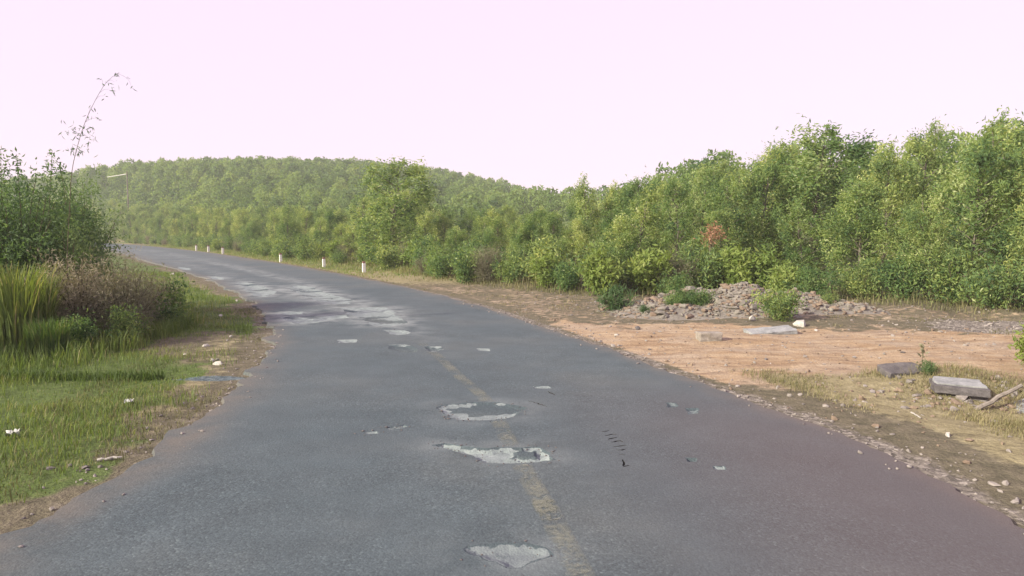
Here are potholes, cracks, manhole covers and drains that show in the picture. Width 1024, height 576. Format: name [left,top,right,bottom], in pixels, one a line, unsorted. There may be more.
crack [602,430,629,467]
pothole [388,344,419,352]
pothole [463,542,554,569]
pothole [432,443,556,464]
pothole [436,402,527,420]
